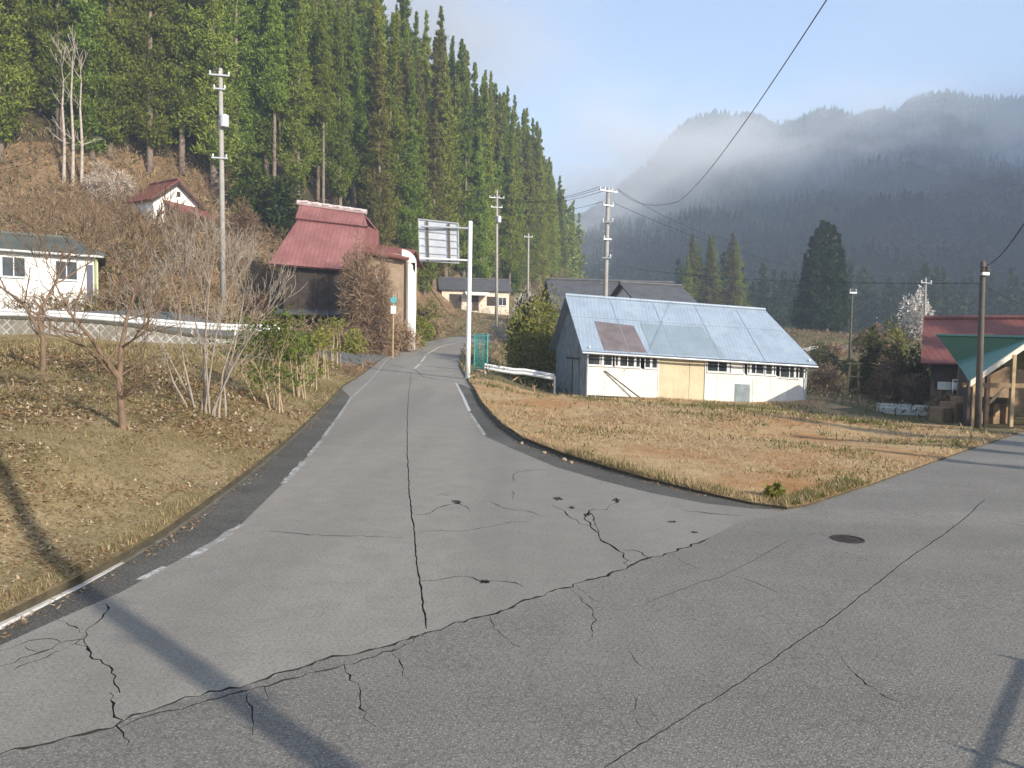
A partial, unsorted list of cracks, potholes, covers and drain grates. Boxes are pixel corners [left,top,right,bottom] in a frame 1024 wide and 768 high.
crack [0,504,709,754]
manhole cover [830,535,865,544]
crack [835,646,902,704]
crack [414,469,545,532]
crack [646,541,788,604]
